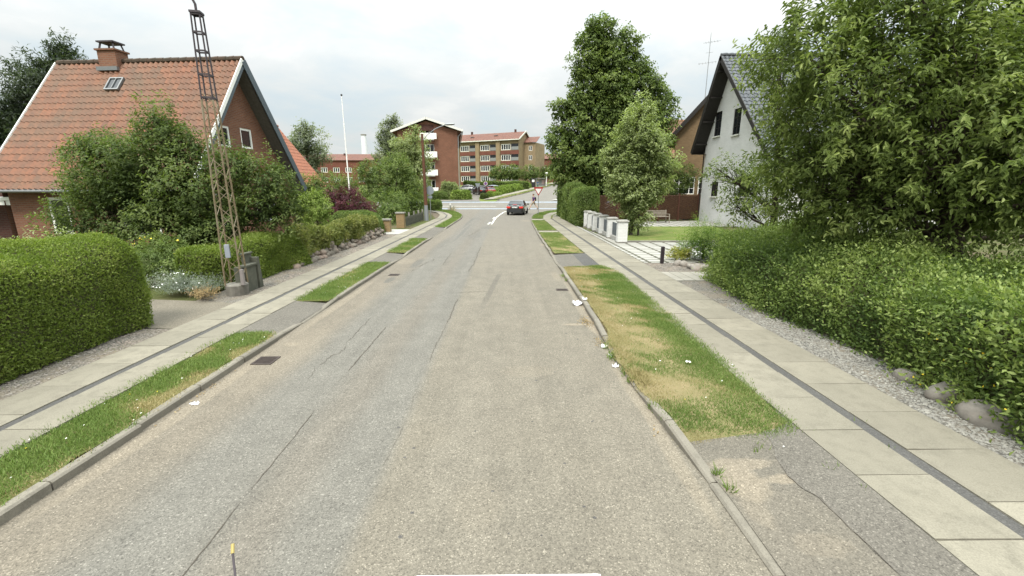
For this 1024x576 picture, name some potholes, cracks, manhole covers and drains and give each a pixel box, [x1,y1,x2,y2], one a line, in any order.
crack [310,316,386,381]
crack [782,466,899,573]
drain grate [250,356,281,365]
crack [182,413,313,576]
